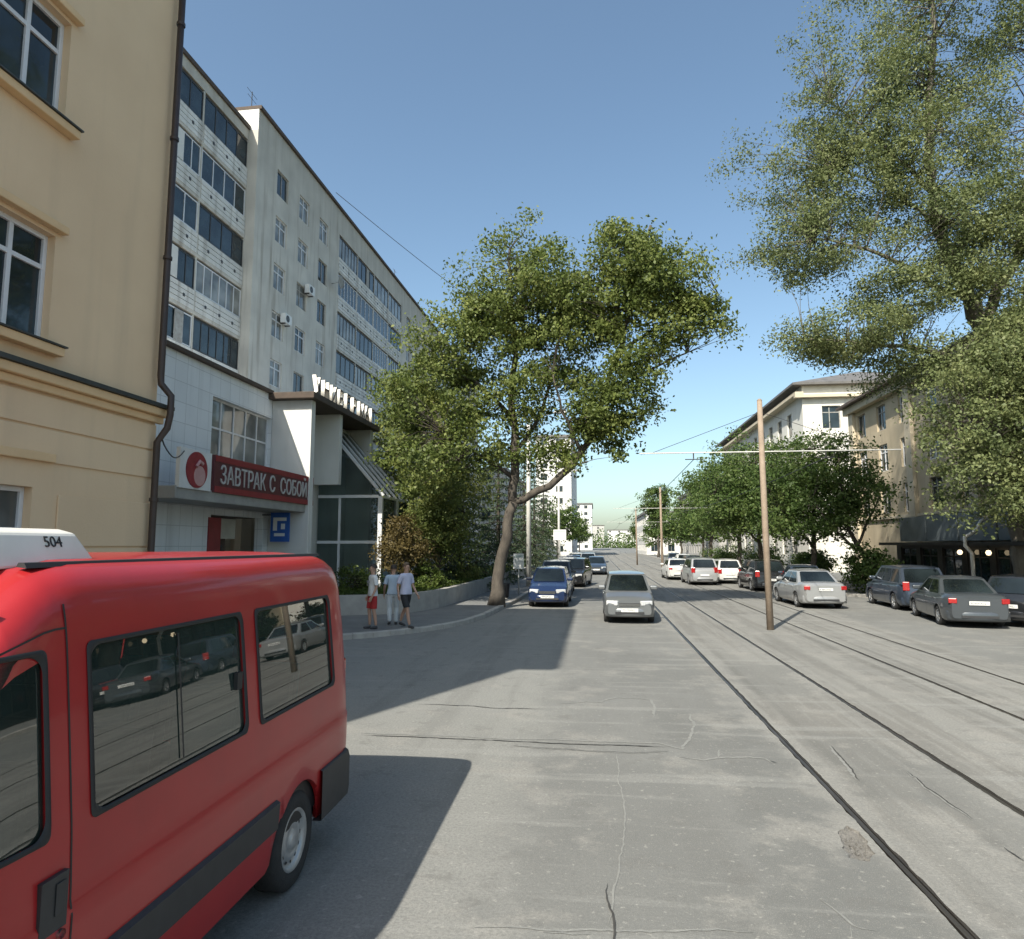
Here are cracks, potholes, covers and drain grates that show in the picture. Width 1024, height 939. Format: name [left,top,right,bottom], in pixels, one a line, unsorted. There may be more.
pothole [838,826,875,862]
crack [370,714,774,939]
crack [906,771,971,819]
crack [830,746,859,781]
crack [822,900,877,937]
